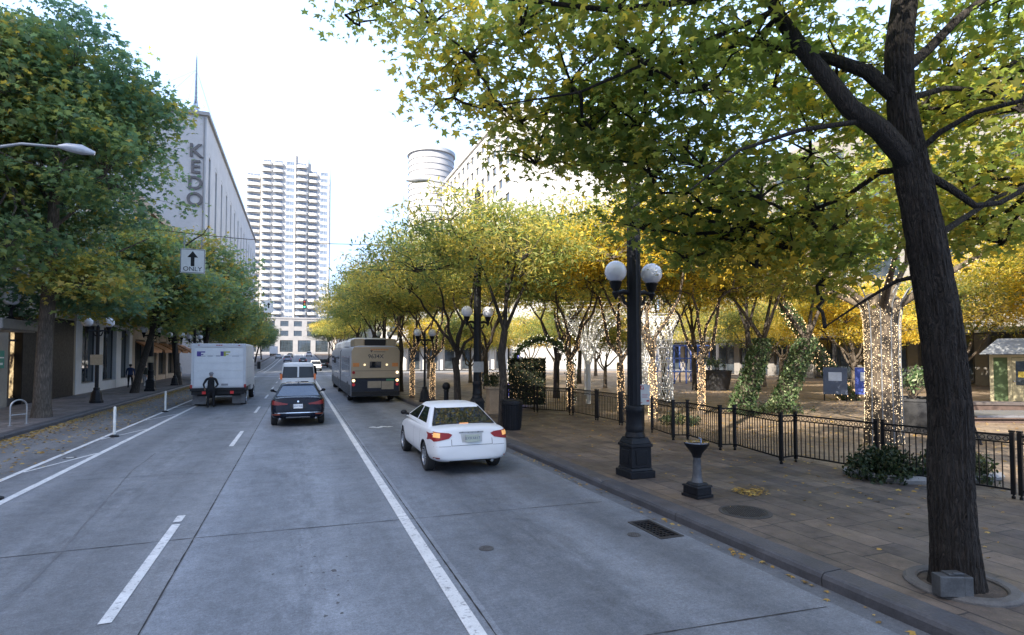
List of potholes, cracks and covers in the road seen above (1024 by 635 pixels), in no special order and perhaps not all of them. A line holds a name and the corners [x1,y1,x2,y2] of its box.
drain grate [628,519,684,539]
manhole cover [718,505,773,519]
